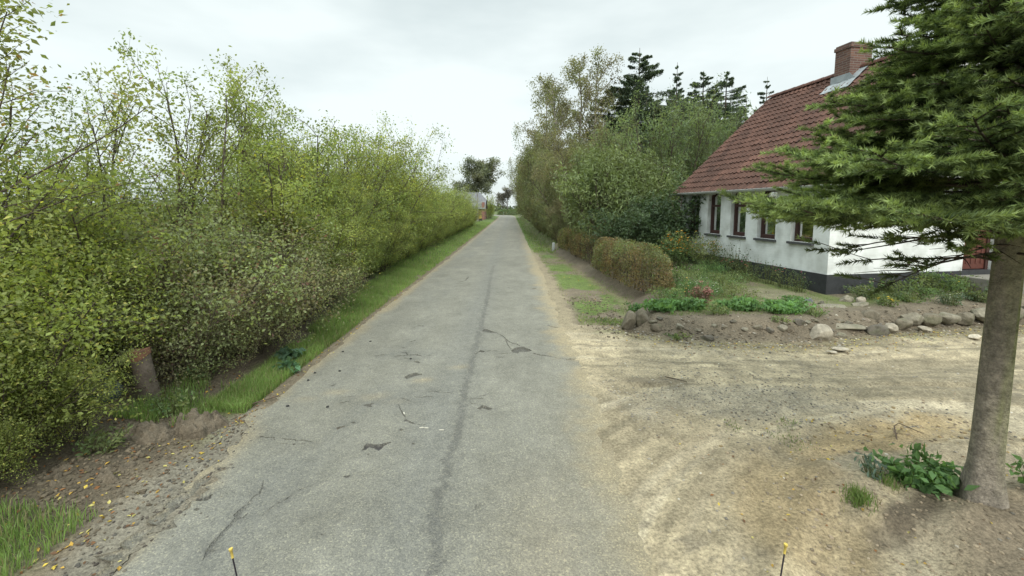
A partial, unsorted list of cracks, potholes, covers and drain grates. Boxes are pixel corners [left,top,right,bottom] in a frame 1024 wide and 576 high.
crack [93,465,316,576]
crack [476,333,575,360]
pothole [362,442,391,451]
crack [399,391,449,425]
